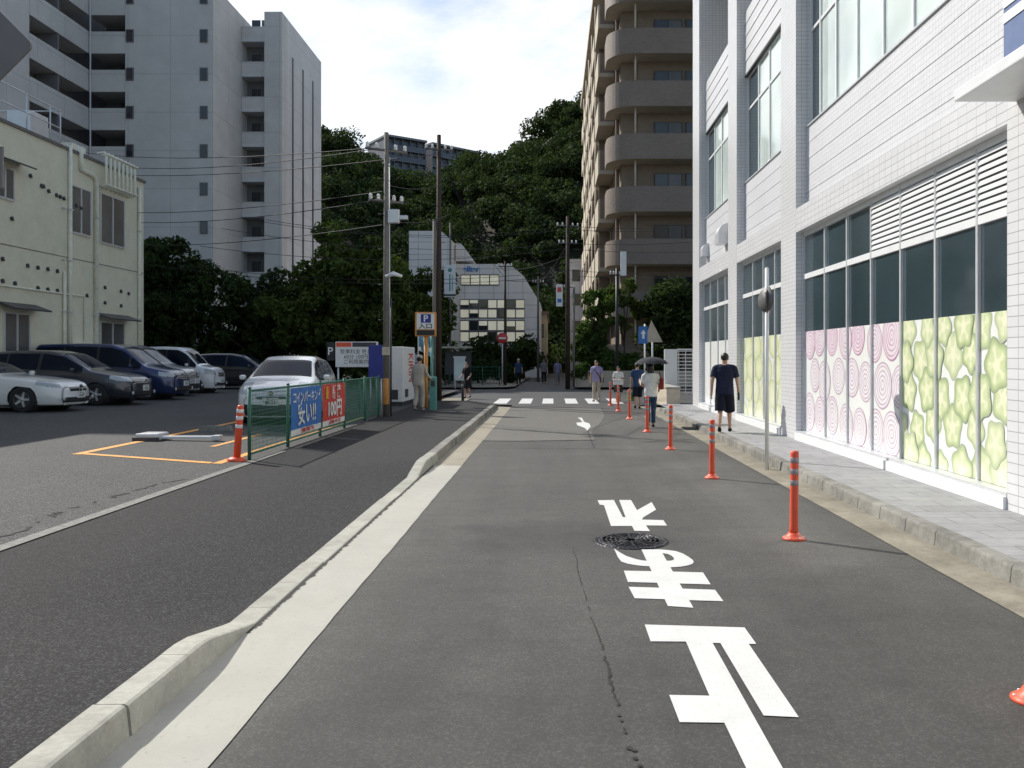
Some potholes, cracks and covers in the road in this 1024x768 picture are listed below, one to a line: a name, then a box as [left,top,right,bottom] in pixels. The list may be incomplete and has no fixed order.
crack [573,550,643,767]
manhole cover [593,533,668,550]
